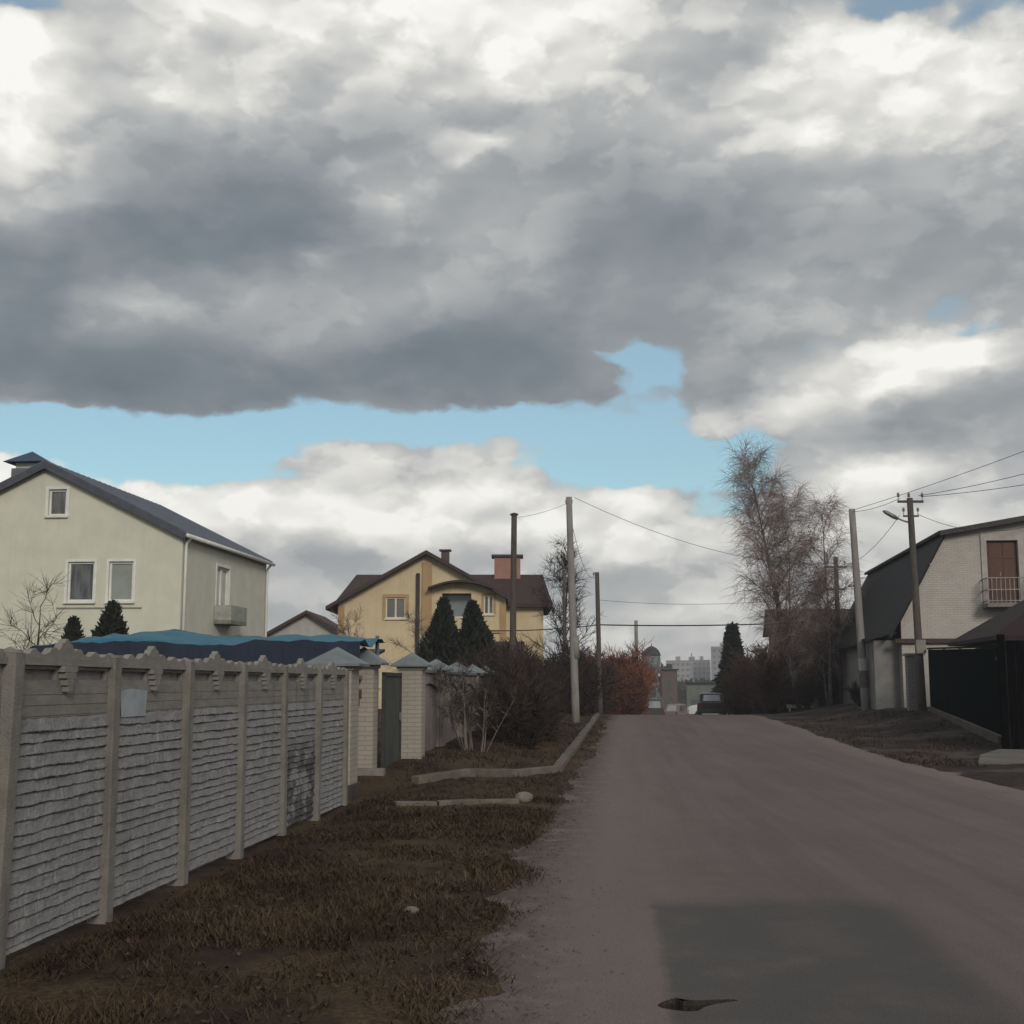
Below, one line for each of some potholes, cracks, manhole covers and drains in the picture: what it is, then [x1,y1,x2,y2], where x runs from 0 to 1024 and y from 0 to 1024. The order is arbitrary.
pothole [657,998,738,1011]
